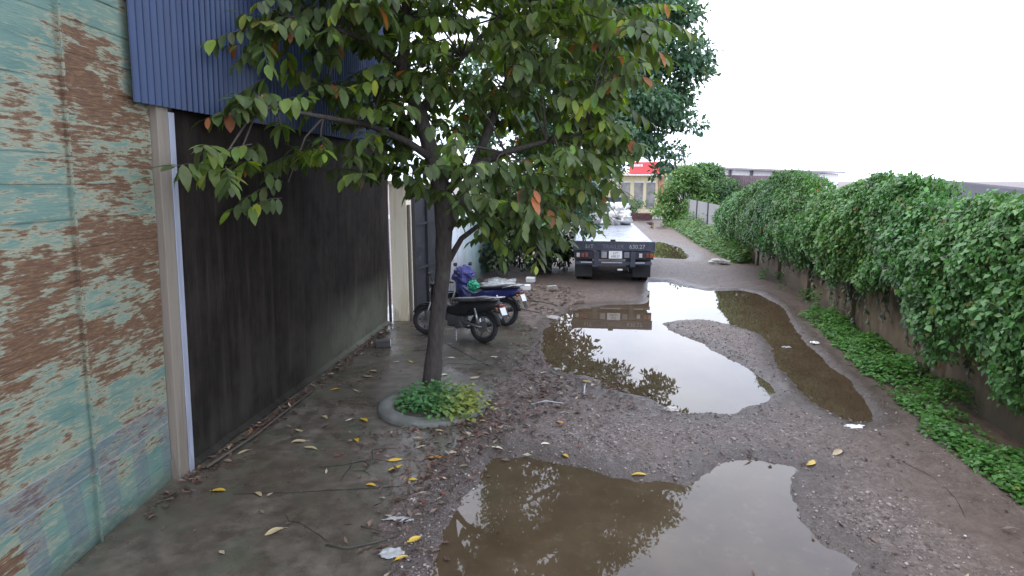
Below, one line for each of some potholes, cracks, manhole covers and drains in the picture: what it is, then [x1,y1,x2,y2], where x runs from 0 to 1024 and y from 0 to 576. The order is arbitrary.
pothole [524,277,902,428]
pothole [651,239,702,261]
pothole [382,439,895,576]
